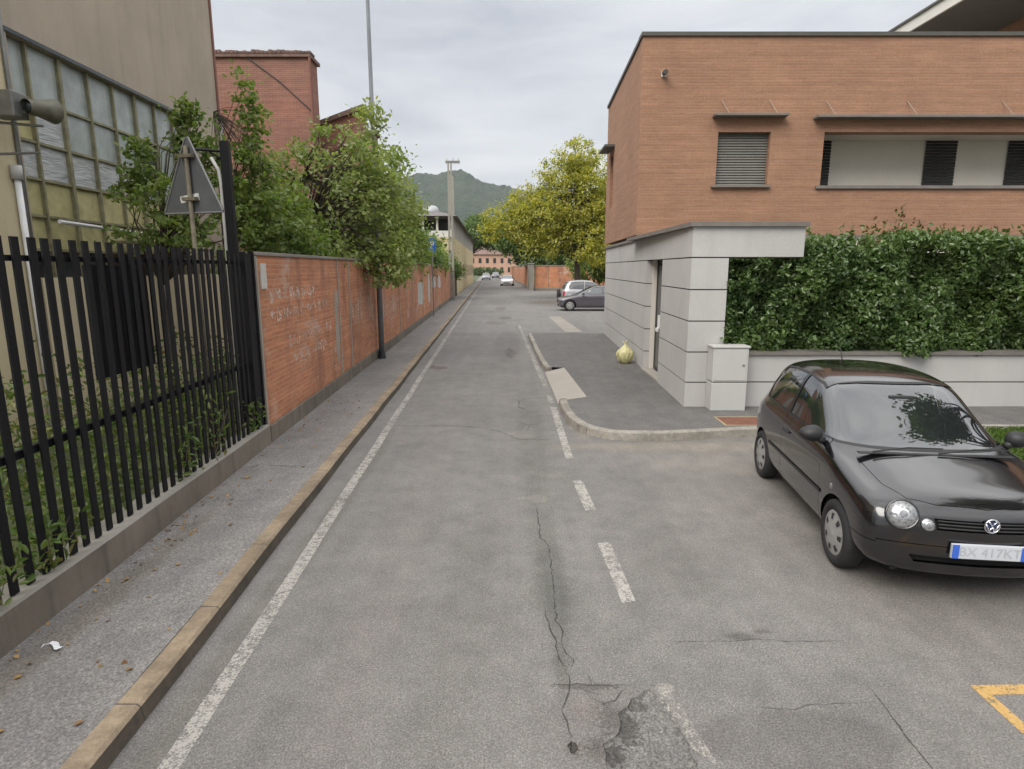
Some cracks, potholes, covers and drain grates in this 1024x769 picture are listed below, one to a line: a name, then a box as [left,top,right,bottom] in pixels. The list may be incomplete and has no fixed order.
crack [536,507,663,749]
crack [406,397,550,440]
pothole [603,689,698,769]
